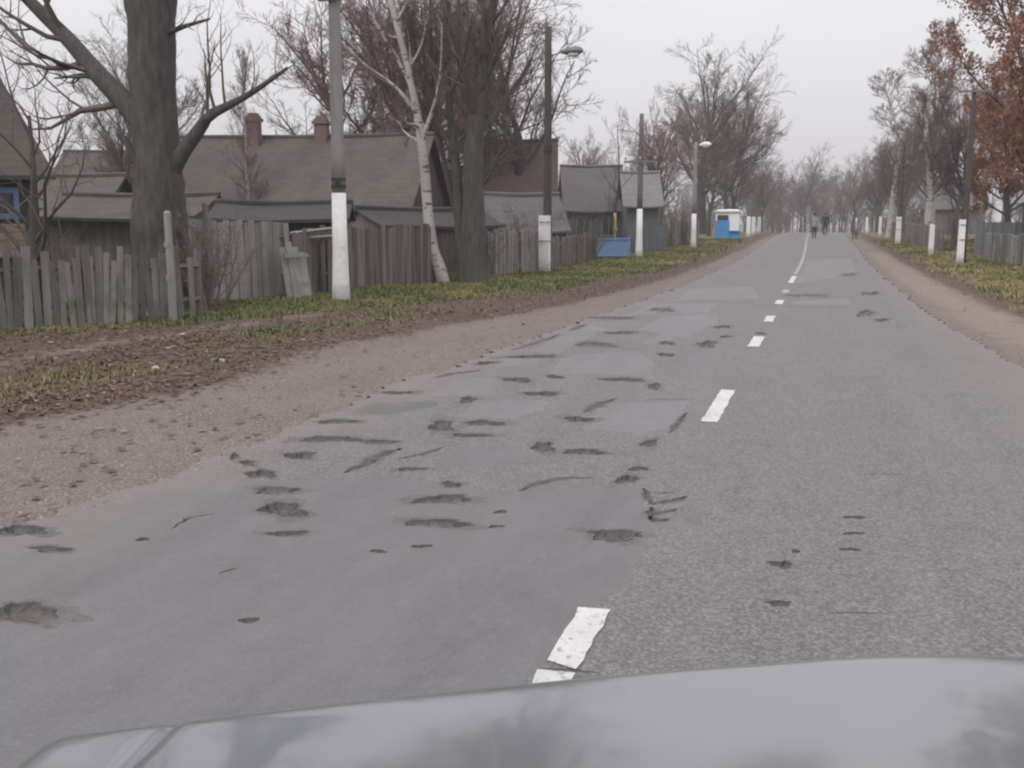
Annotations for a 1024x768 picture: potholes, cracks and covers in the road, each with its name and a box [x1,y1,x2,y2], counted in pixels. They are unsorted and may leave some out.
pothole [587,529,644,543]
pothole [256,501,309,518]
pothole [0,525,49,536]
pothole [767,560,793,569]
crack [518,477,593,491]
pothole [0,601,61,624]
pothole [530,442,555,453]
pothole [410,494,471,503]
crack [641,488,688,522]
crack [172,513,215,529]
pothole [405,519,476,528]
